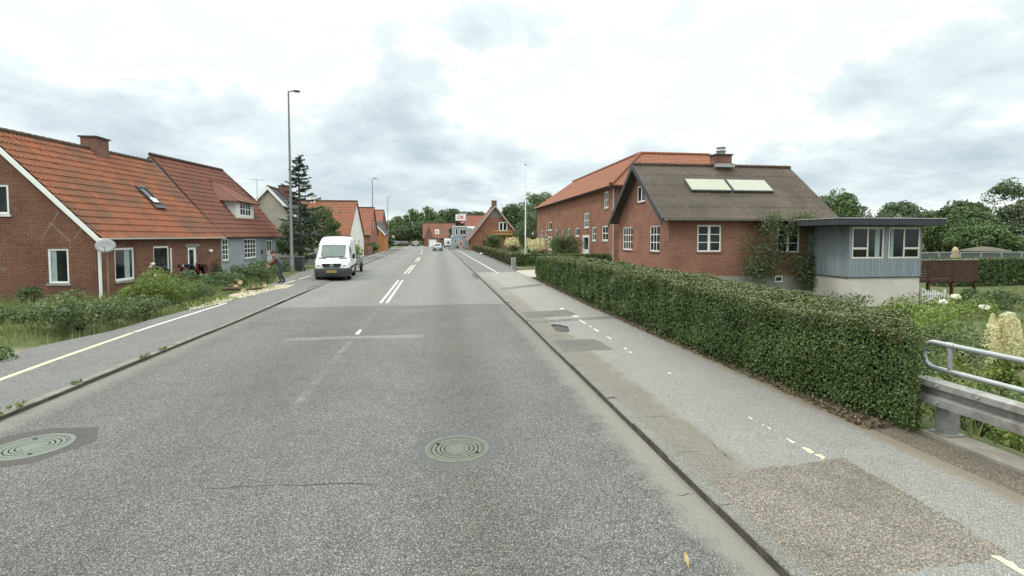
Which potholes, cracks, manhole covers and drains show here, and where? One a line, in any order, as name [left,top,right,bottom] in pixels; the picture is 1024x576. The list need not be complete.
manhole cover [0,433,77,461]
manhole cover [424,435,490,463]
